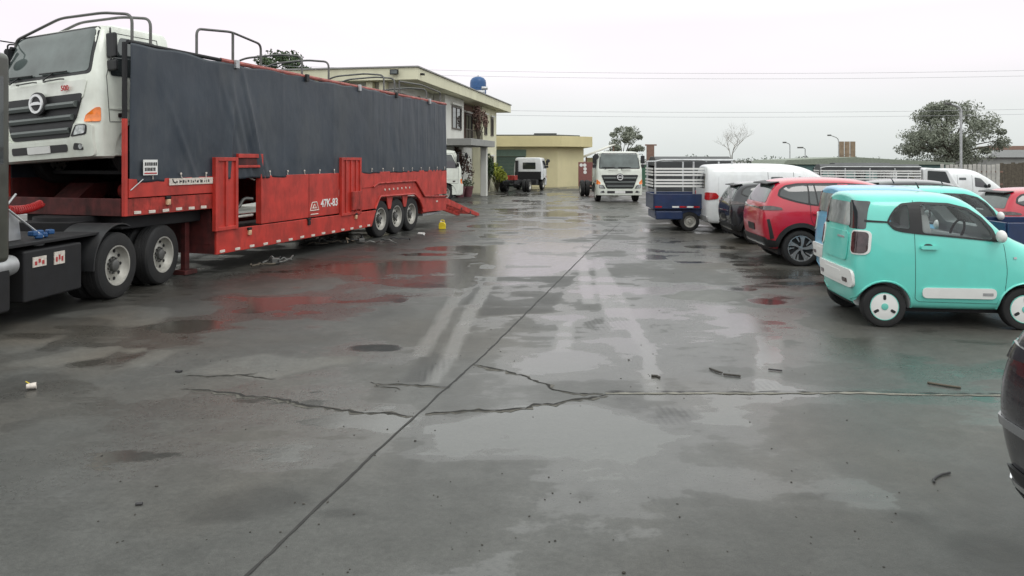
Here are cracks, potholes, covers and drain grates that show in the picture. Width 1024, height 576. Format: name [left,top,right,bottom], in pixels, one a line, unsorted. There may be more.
crack [181,364,608,418]
